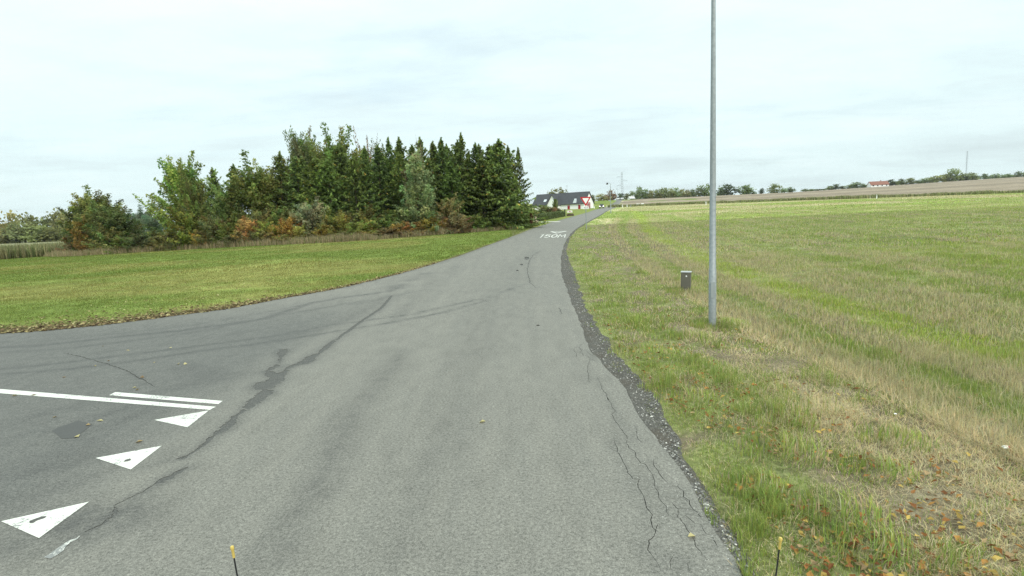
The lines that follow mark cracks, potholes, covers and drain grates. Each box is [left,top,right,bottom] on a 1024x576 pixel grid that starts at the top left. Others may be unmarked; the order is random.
crack [574,344,717,569]
crack [67,353,153,386]
